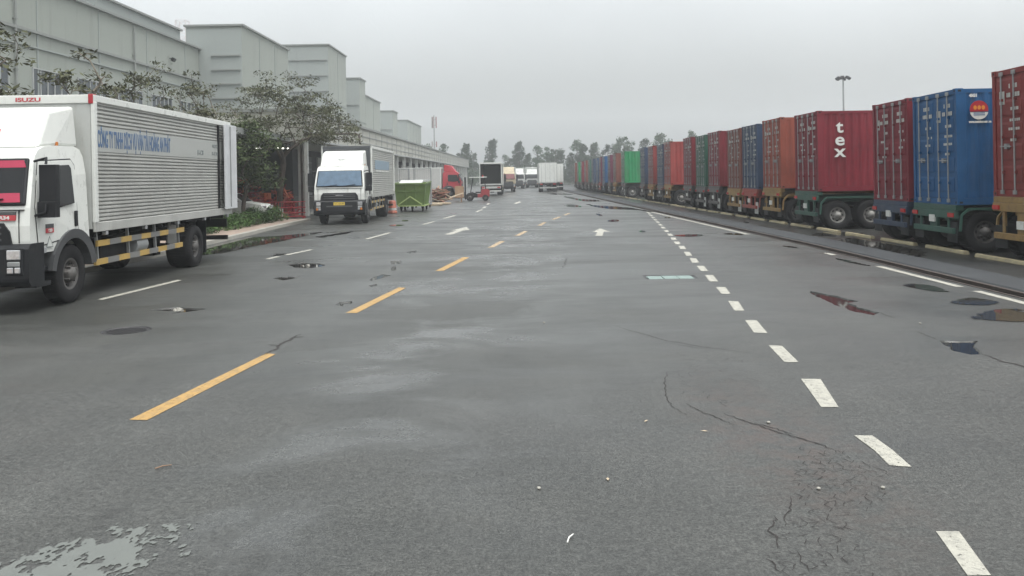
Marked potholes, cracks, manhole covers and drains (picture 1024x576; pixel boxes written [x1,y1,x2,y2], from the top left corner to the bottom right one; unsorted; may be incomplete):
crack [663,372,888,576]
crack [261,335,304,356]
pothole [940,341,981,354]
crack [626,329,758,406]
